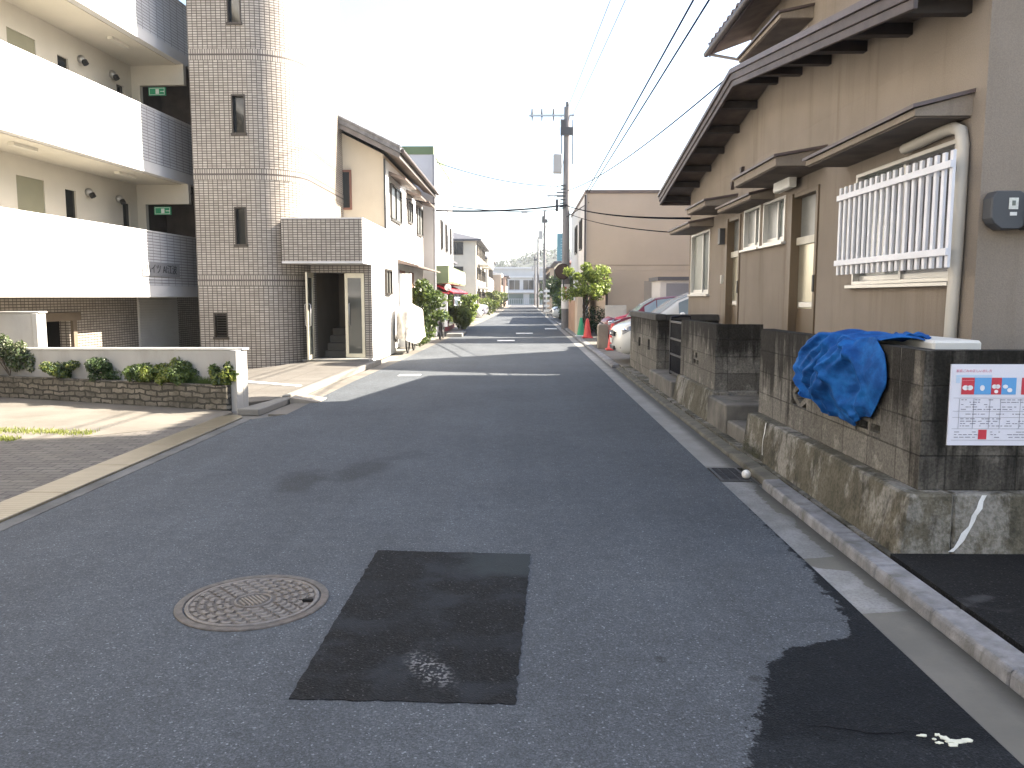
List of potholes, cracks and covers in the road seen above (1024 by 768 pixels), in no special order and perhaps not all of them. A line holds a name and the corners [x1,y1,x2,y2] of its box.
drain grate [708,468,752,482]
manhole cover [174,575,329,632]
crack [809,726,926,734]
